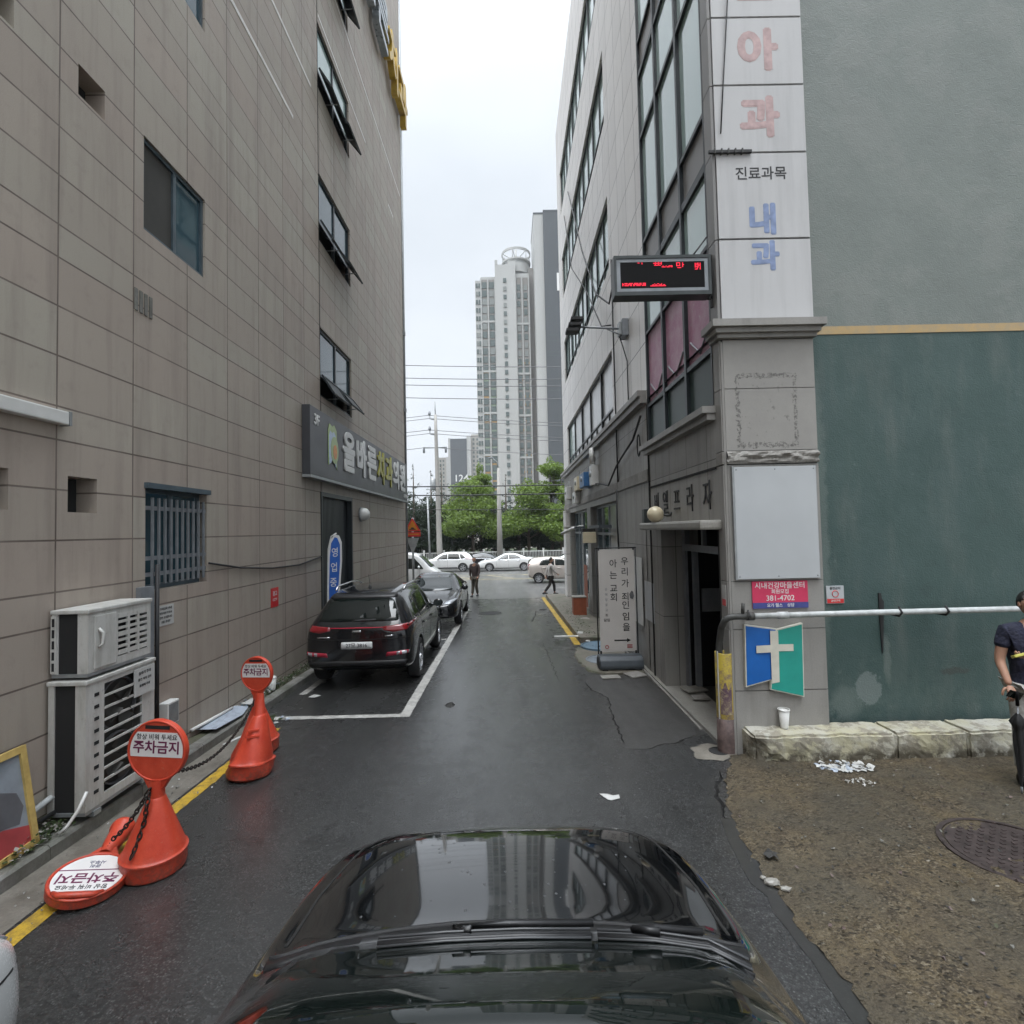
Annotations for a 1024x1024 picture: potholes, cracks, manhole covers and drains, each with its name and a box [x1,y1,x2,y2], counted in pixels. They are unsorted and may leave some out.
manhole cover [936,818,1024,884]
crack [585,682,695,750]
